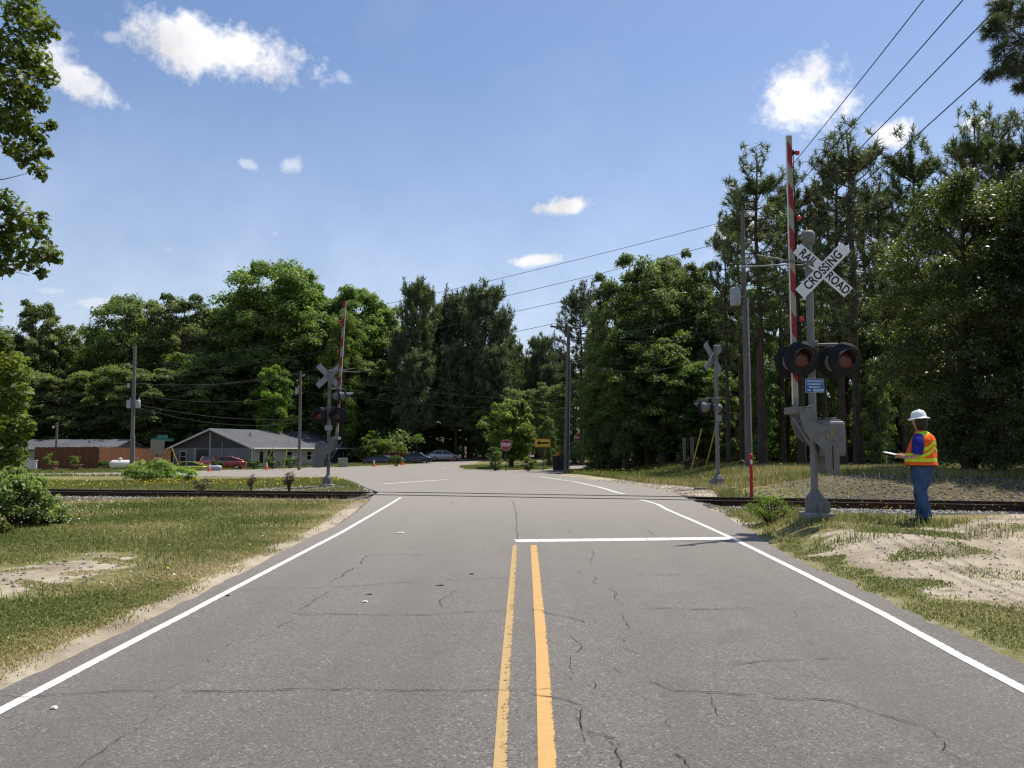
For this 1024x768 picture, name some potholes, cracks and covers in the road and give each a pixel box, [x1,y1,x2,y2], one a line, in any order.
crack [18,678,623,768]
crack [207,548,583,666]
crack [654,682,976,767]
